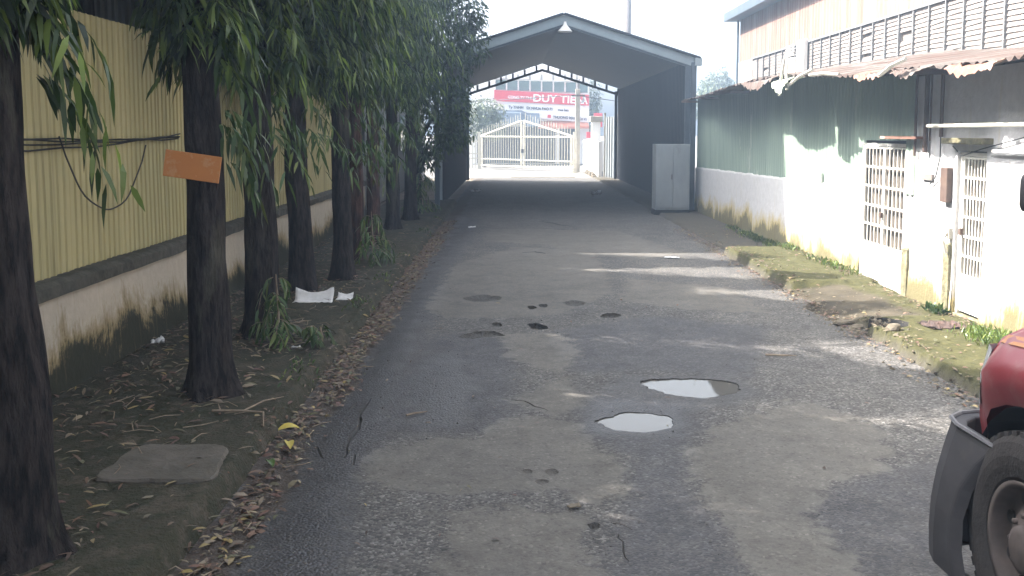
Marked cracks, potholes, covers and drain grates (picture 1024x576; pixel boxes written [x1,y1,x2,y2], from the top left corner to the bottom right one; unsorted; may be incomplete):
pothole [867,317,909,331]
crack [343,399,371,465]
pothole [595,412,674,432]
pothole [640,378,741,398]
pothole [459,331,505,339]
crack [613,523,632,562]
